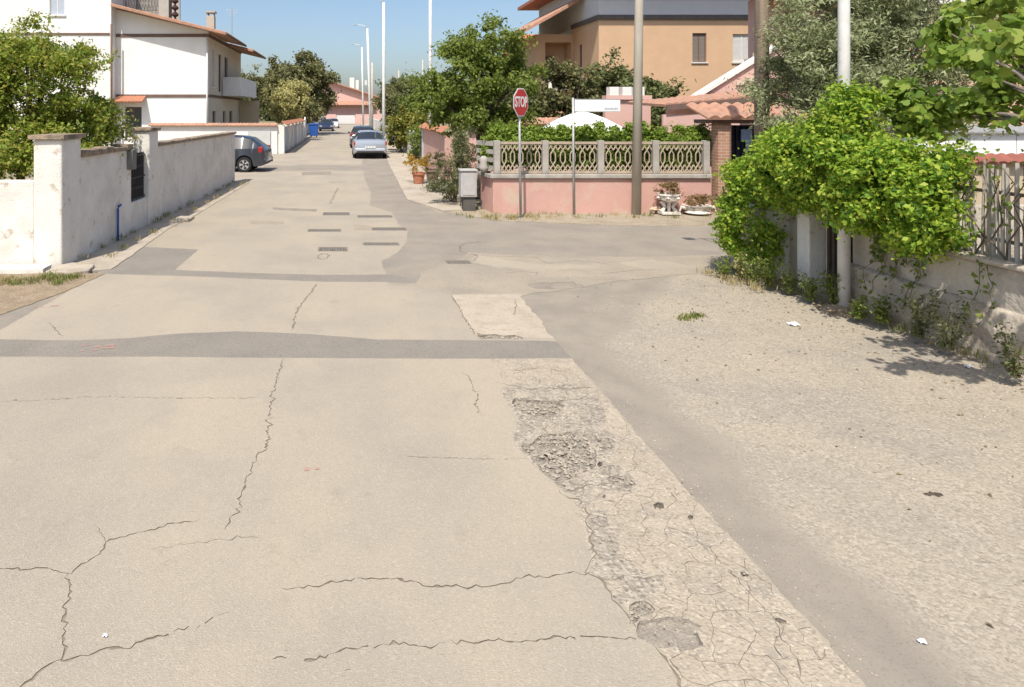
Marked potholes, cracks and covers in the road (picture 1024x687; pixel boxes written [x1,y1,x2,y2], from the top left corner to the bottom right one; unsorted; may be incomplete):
pothole [512,398,564,418]
pothole [629,600,655,624]
pothole [607,475,637,488]
crack [283,361,825,687]
pothole [597,438,616,451]
pothole [521,432,600,487]
pothole [636,617,703,651]
crack [1,285,317,687]
